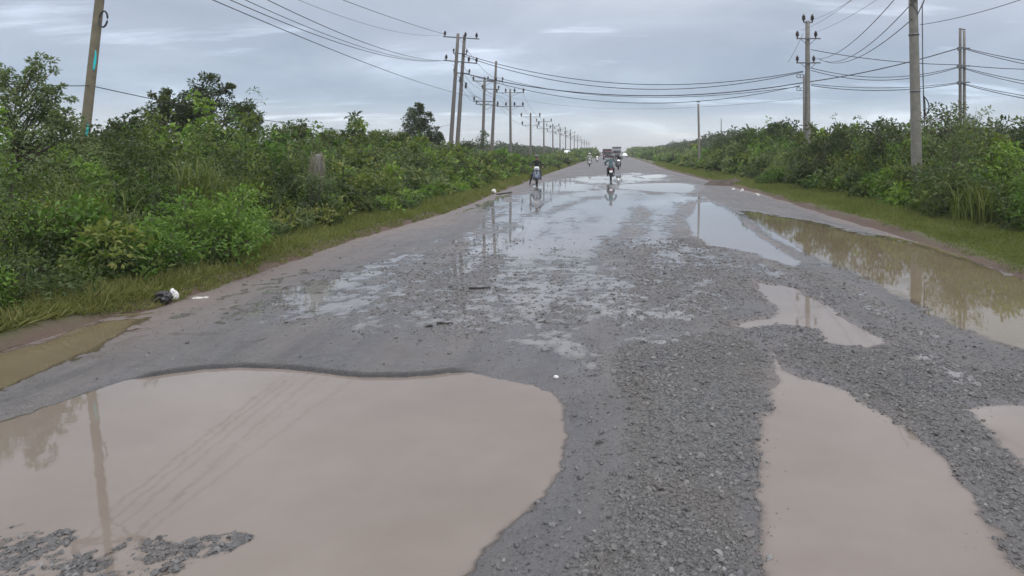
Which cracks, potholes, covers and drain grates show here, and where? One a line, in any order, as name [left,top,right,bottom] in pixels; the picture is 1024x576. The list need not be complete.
pothole [0,361,578,576]
pothole [678,202,815,268]
pothole [733,335,1024,576]
pothole [707,272,924,354]
pothole [611,183,702,193]
